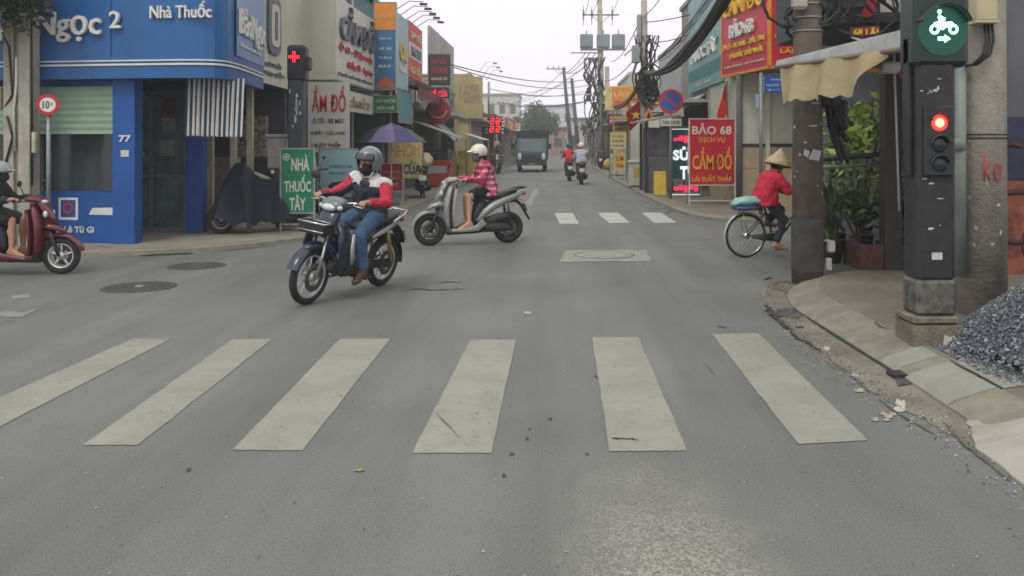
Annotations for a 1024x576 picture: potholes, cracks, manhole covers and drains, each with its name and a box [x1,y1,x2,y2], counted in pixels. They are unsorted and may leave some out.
manhole cover [560,250,651,262]
manhole cover [99,281,178,293]
crack [403,281,465,290]
manhole cover [166,262,227,270]
